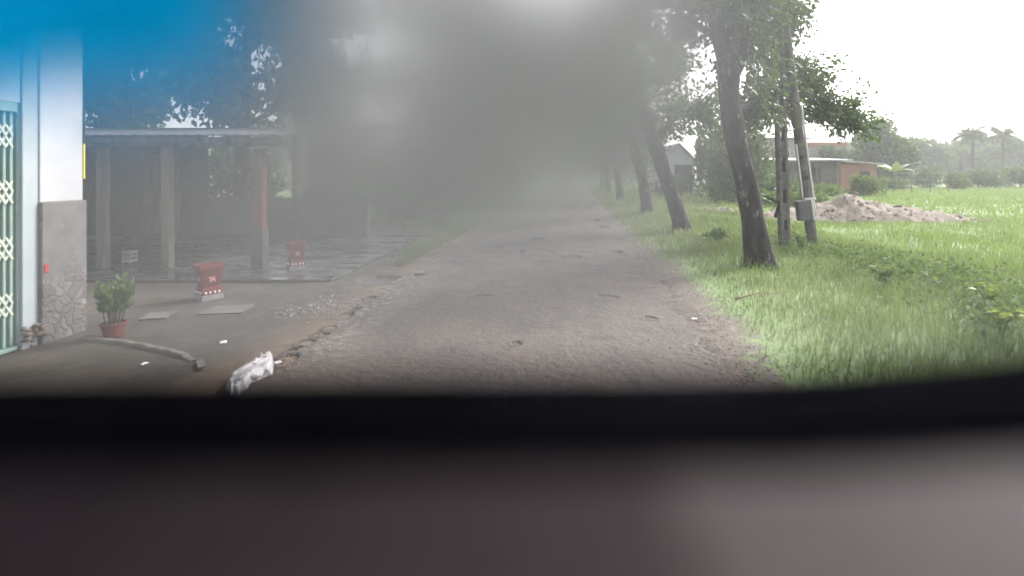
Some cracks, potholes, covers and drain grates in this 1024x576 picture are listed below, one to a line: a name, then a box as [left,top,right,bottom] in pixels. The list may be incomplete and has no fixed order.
pothole [273,351,303,368]
